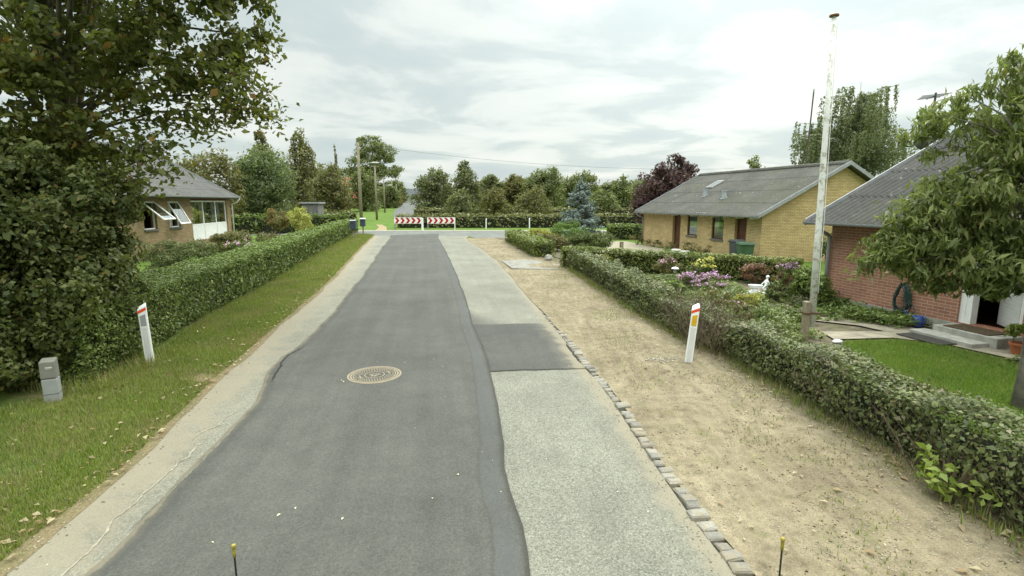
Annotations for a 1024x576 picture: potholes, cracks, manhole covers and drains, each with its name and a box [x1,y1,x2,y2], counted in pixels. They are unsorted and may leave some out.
manhole cover [347,366,402,384]
crack [271,347,303,382]
